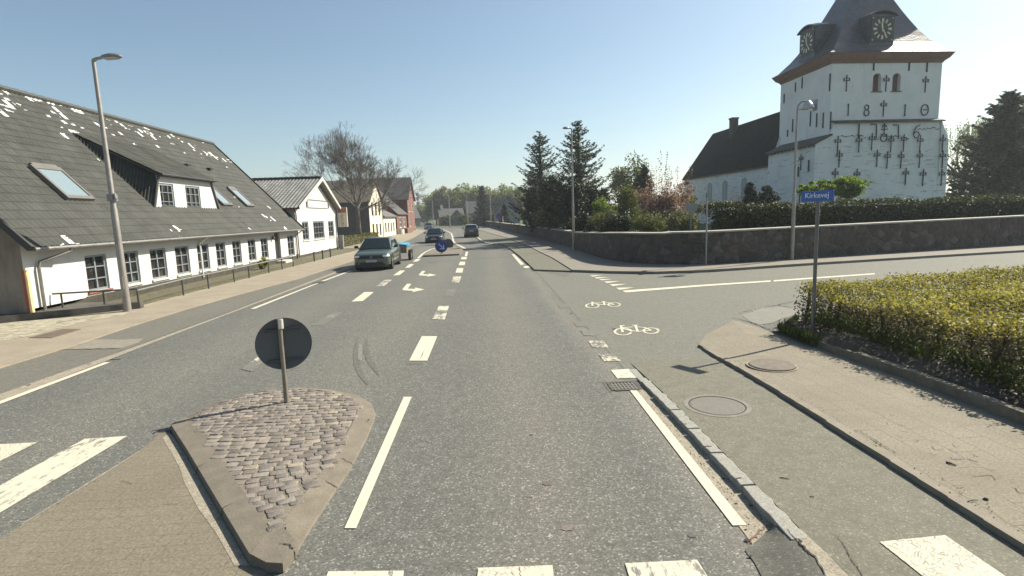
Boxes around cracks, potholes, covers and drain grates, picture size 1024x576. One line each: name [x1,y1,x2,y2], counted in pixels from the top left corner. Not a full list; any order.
manhole cover [684,395,752,417]
drain grate [603,380,642,392]
manhole cover [746,359,798,372]
